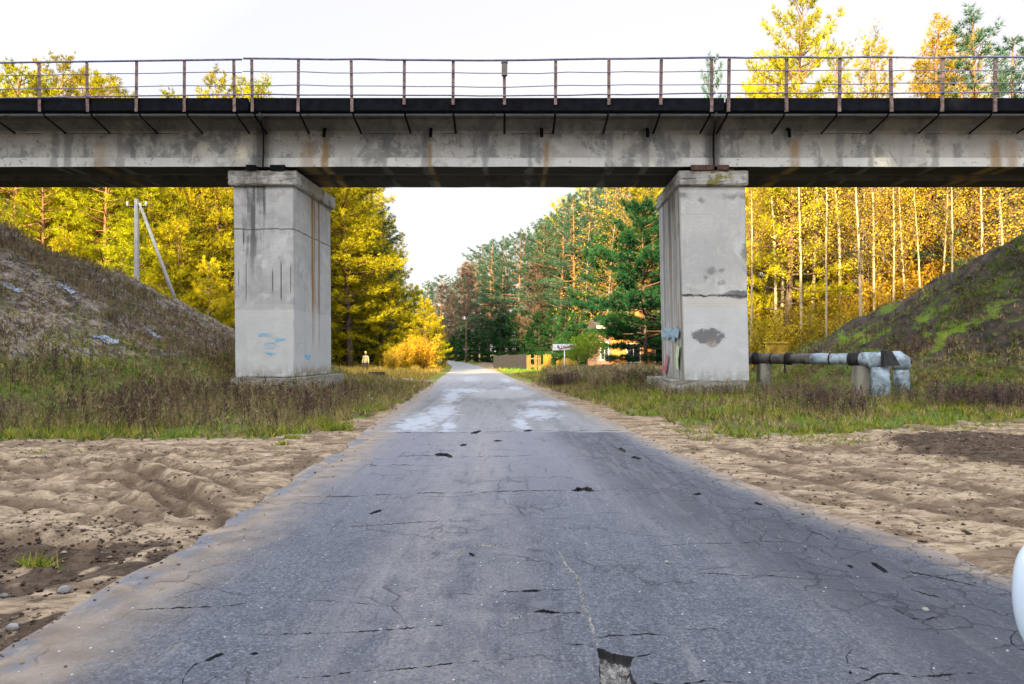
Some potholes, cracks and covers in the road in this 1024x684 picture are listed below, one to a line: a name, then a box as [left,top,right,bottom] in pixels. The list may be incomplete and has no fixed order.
crack [260,622,466,635]
crack [552,549,660,657]
crack [892,571,983,620]
pothole [597,648,637,684]
crack [846,648,979,684]
